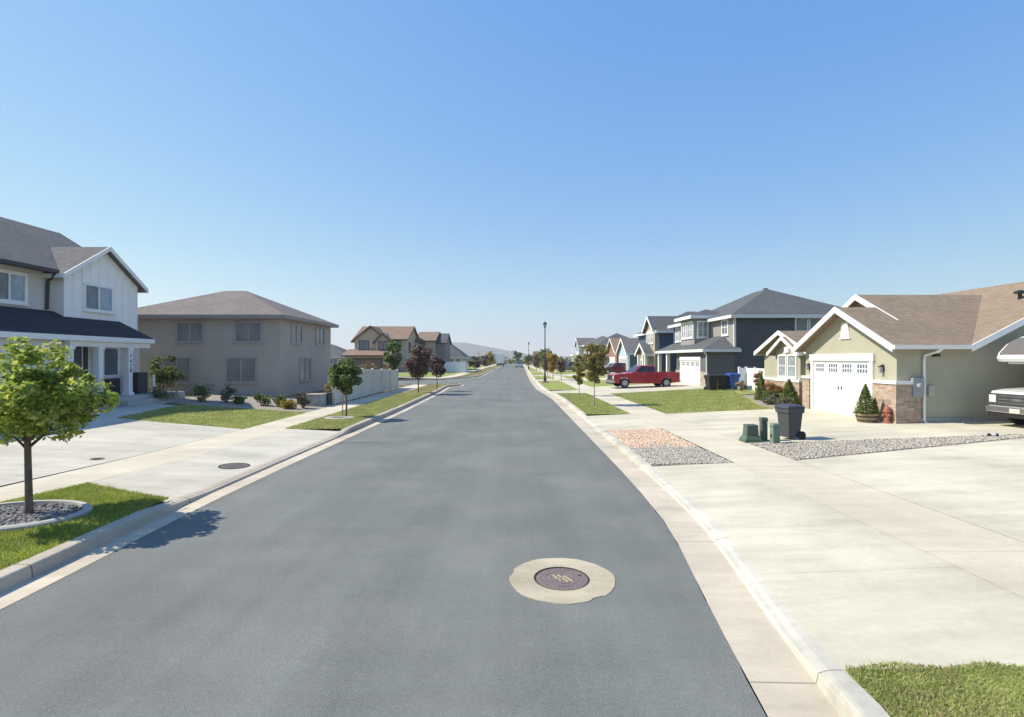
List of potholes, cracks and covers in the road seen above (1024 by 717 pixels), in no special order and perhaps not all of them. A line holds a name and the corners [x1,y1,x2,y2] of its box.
manhole cover [509,558,615,605]
